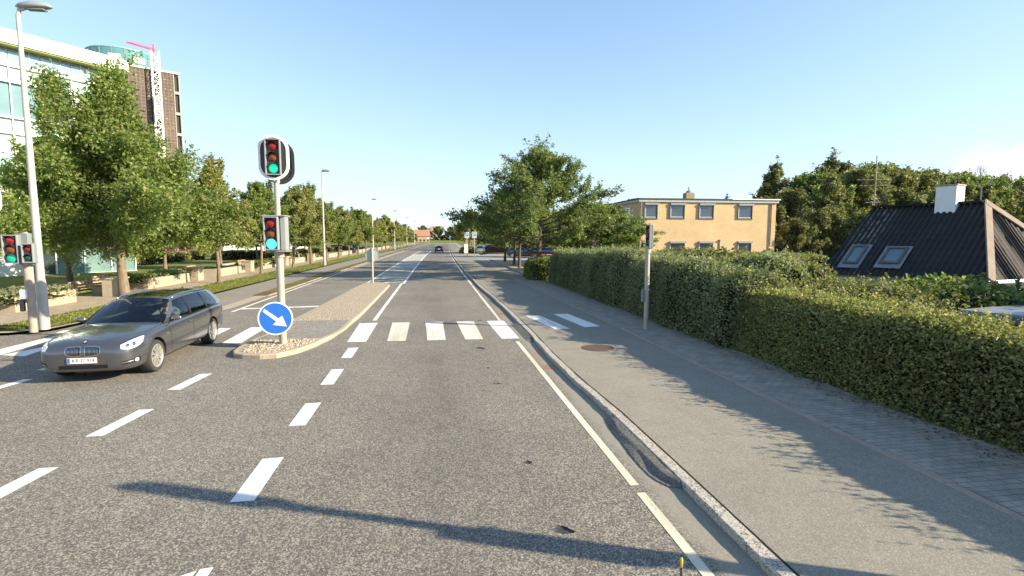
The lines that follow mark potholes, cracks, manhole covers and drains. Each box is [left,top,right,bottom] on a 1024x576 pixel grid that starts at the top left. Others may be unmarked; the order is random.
pothole [551,525,576,534]
